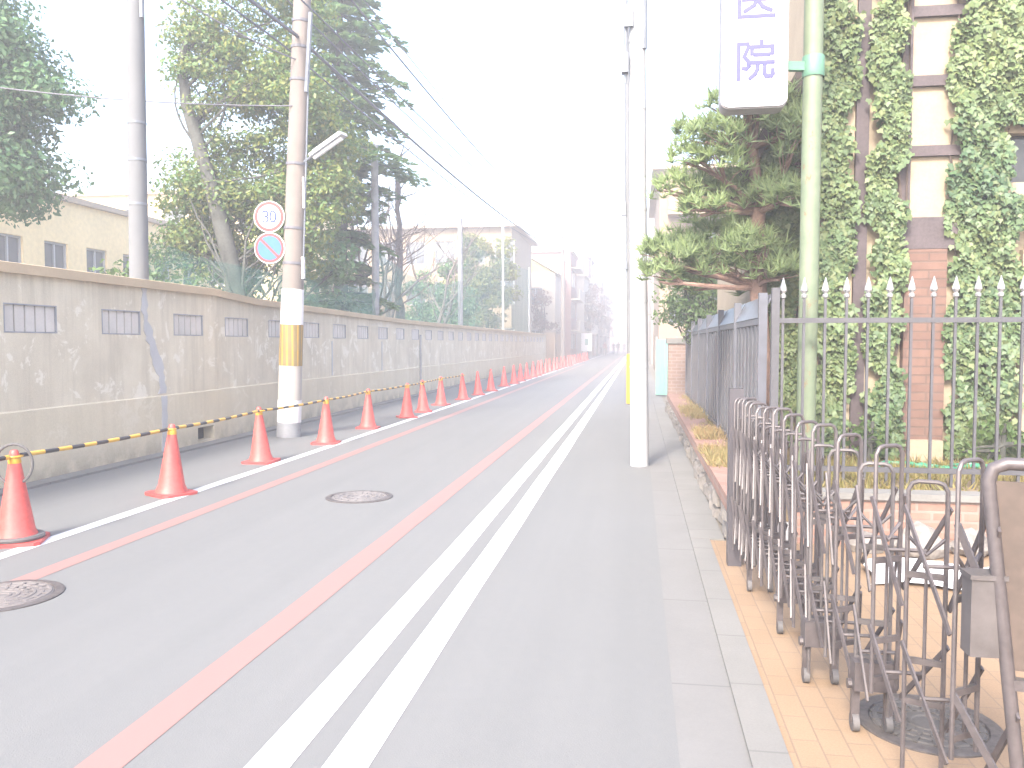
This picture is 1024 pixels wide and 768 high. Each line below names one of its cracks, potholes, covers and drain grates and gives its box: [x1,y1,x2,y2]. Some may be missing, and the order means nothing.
manhole cover [0,579,65,612]
manhole cover [859,693,1004,758]
manhole cover [325,490,393,504]
